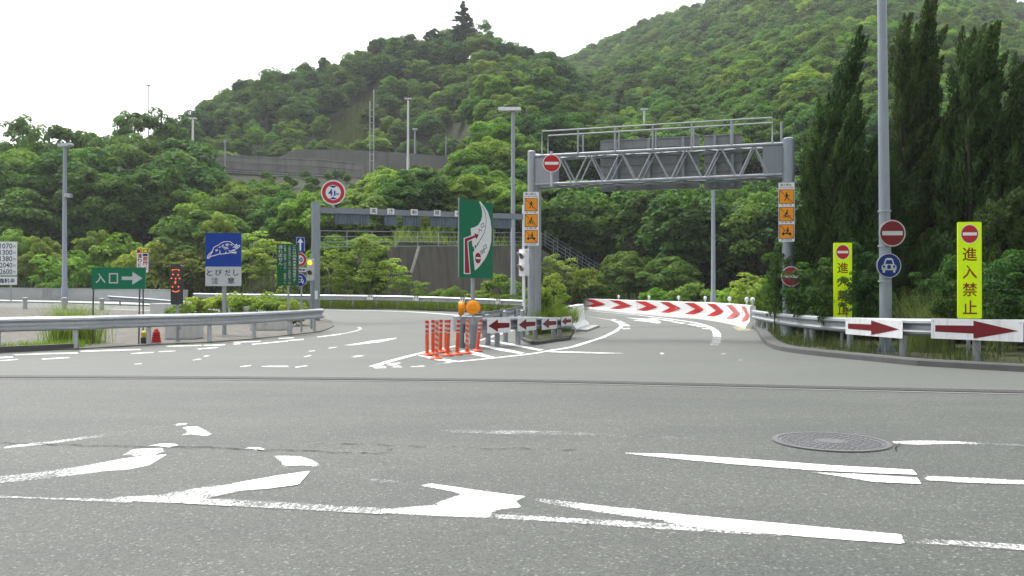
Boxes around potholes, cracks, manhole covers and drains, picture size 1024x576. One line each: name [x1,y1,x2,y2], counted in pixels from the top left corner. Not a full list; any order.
manhole cover [772,432,893,452]
crack [2,442,575,454]
